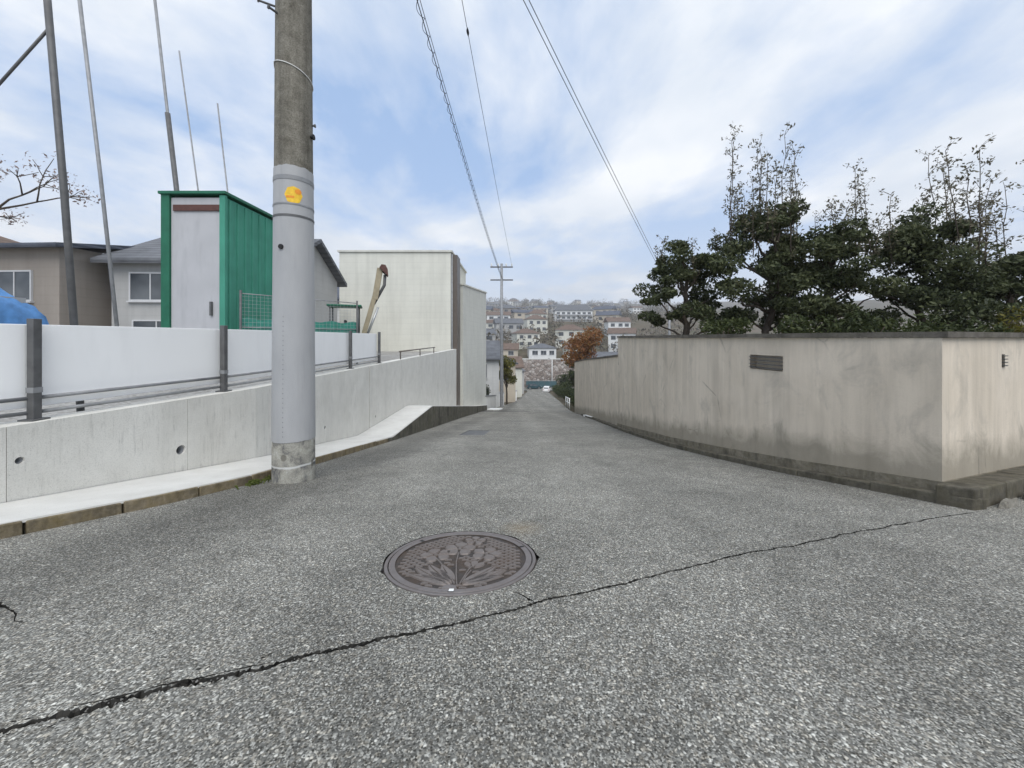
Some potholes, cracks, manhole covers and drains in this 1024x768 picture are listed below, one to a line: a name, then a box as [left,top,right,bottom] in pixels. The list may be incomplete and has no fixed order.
manhole cover [381,531,539,598]
crack [0,512,973,738]
